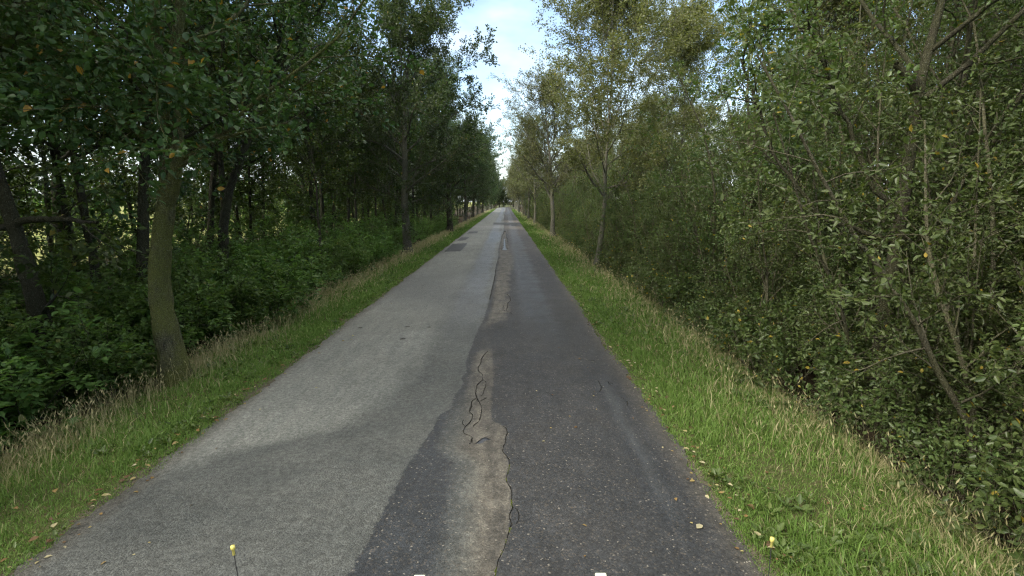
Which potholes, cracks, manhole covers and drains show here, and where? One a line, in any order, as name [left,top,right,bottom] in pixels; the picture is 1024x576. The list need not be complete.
crack [462,351,505,444]
